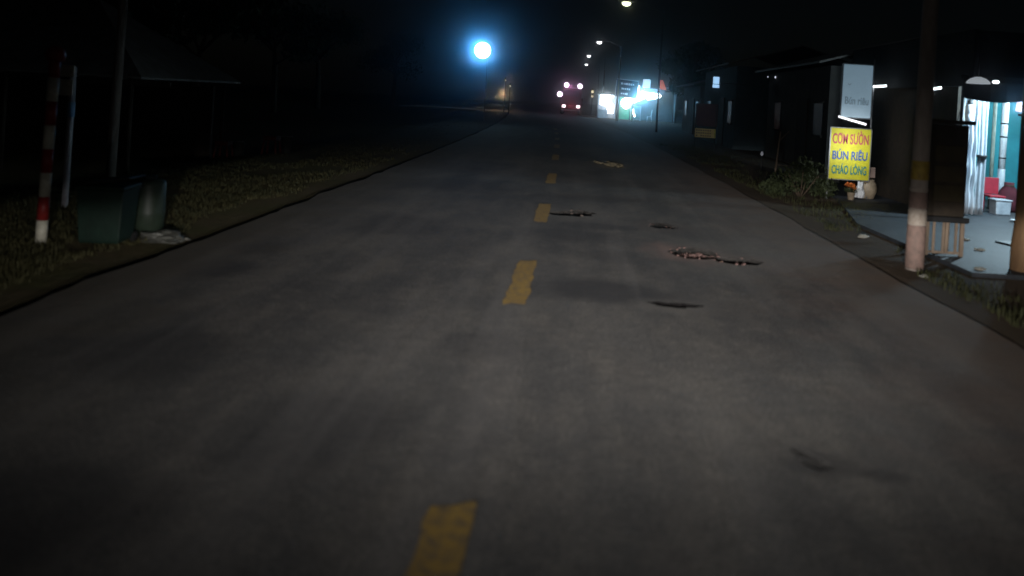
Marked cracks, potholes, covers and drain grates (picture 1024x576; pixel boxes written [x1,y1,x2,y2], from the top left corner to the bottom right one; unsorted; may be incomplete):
pothole [593,160,624,168]
pothole [549,209,596,217]
pothole [667,247,764,266]
pothole [647,301,703,309]
